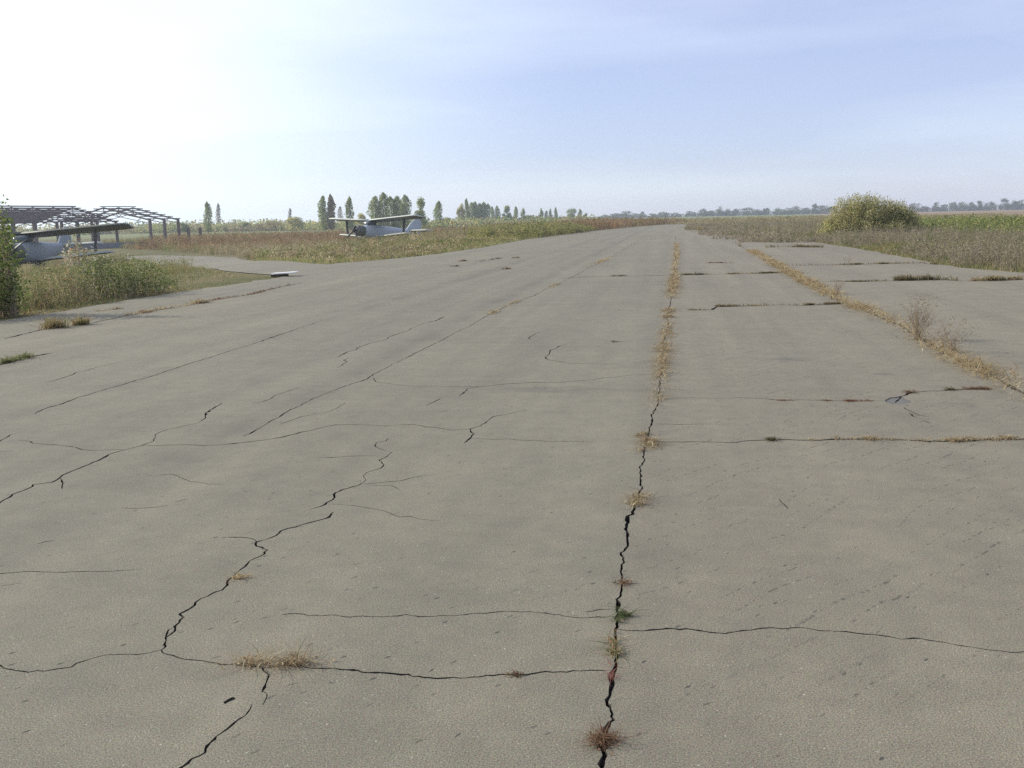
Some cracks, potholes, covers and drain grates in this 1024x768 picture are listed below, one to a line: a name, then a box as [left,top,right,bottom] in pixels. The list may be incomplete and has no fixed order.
crack [0,236,1024,768]
pothole [885,396,912,405]
